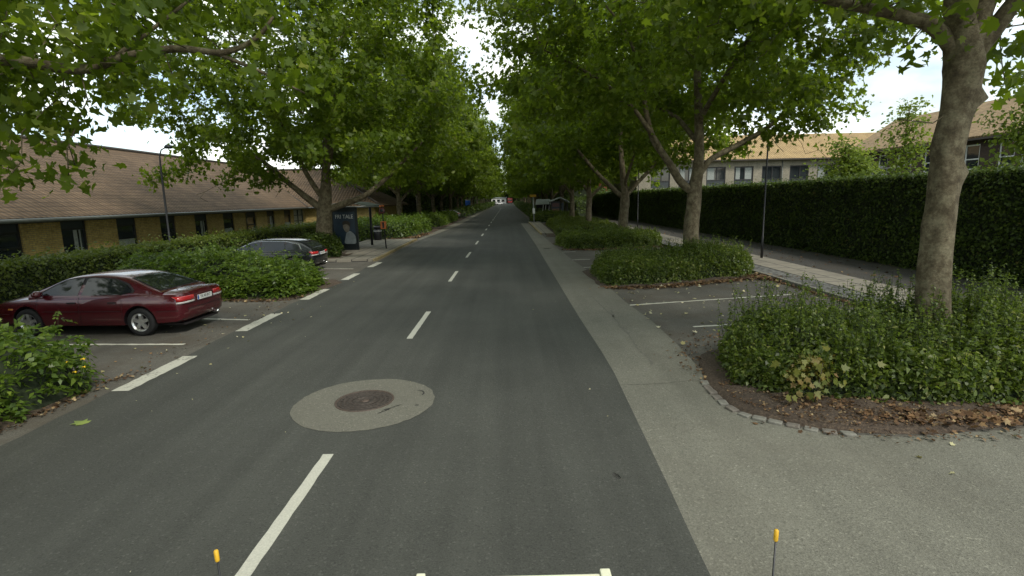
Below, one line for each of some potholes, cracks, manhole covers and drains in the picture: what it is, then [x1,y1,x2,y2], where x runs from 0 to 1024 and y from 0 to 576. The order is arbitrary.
manhole cover [290,379,435,432]
